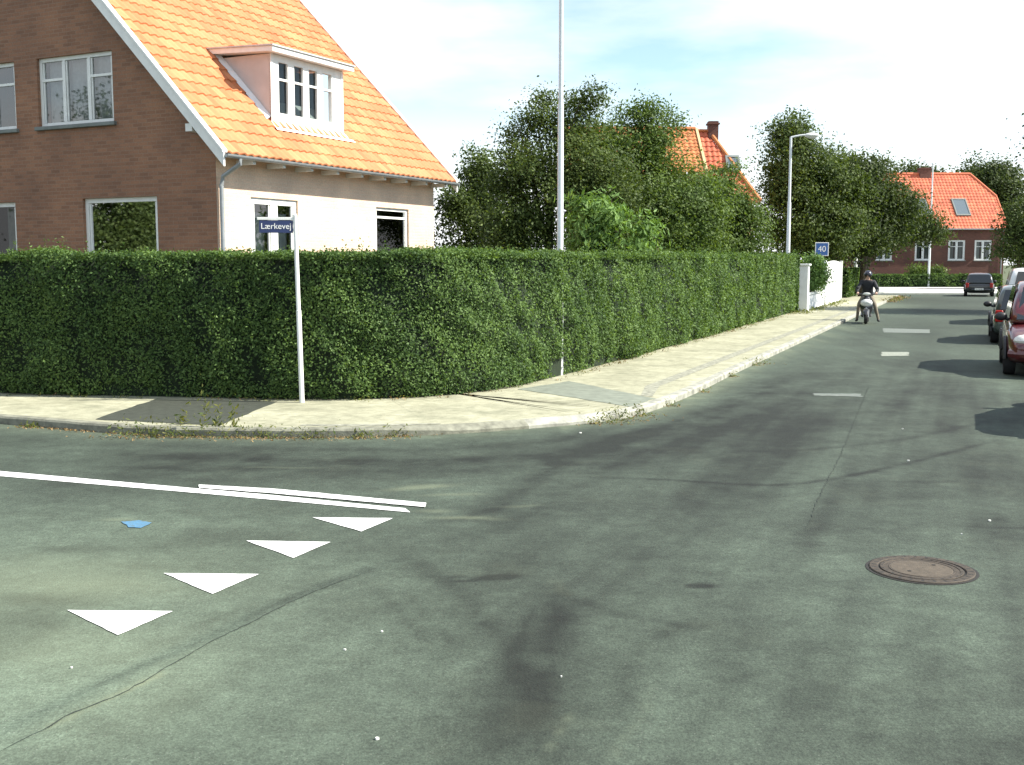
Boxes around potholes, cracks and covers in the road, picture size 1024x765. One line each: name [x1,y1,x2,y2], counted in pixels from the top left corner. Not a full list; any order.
manhole cover [865,555,980,585]
crack [3,574,360,750]
crack [806,388,869,530]
